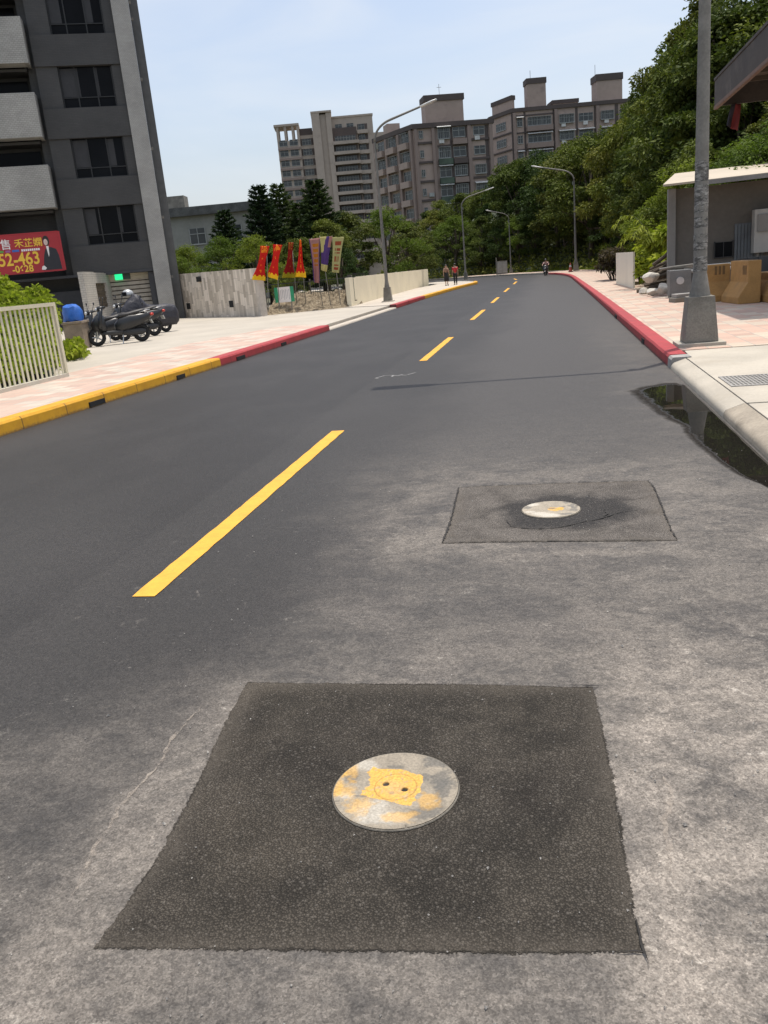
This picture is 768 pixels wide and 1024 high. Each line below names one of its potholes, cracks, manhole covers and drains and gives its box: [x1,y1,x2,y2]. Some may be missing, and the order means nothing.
manhole cover [332,753,460,832]
manhole cover [522,501,581,519]
crack [76,709,200,889]
drain grate [718,374,768,387]
